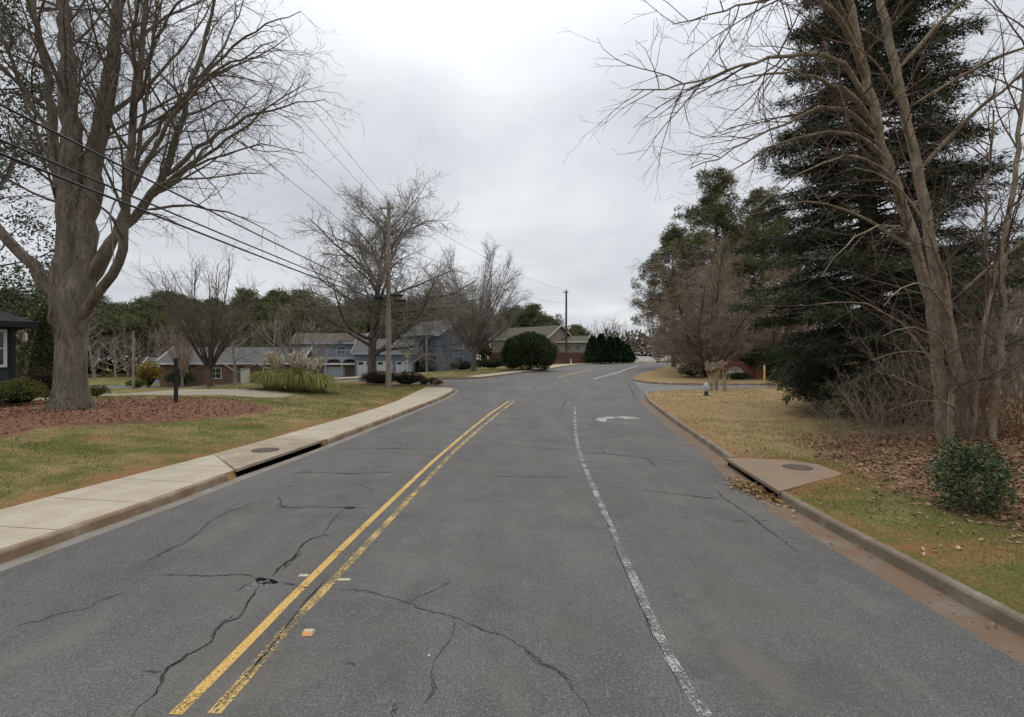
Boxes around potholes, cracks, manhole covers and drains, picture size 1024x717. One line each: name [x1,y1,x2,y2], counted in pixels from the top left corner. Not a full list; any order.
crack [134,472,381,714]
crack [333,582,591,714]
drain grate [725,458,843,498]
pothole [246,577,279,590]
drain grate [215,438,322,477]
crack [642,489,795,550]
